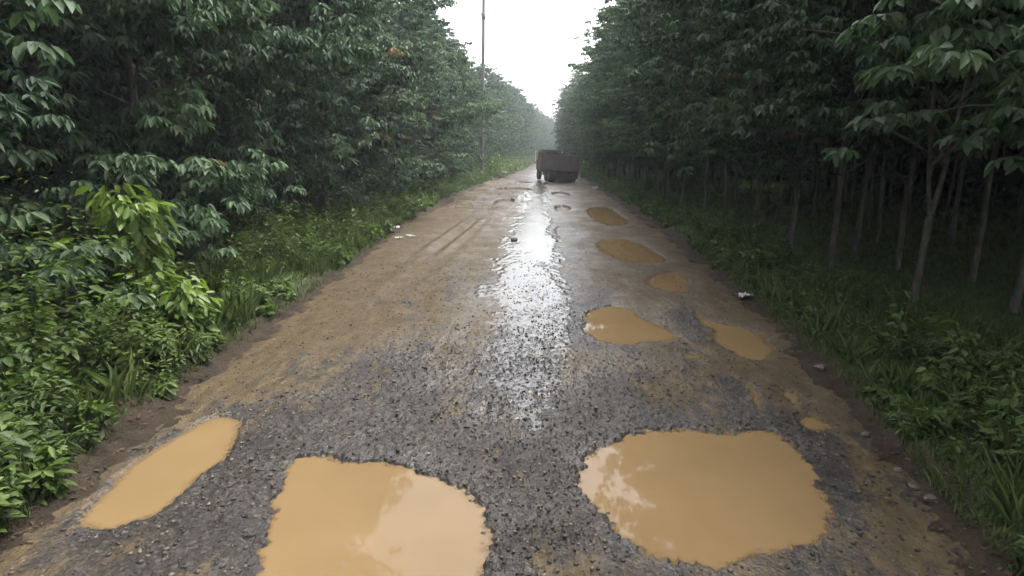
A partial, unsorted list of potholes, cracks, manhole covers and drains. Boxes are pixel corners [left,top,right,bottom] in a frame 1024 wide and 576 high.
pothole [594,238,670,264]
pothole [242,449,501,576]
pothole [639,270,694,293]
pothole [578,304,684,346]
pothole [568,423,845,576]
pothole [688,306,780,363]
pothole [586,206,631,226]
pothole [61,412,251,536]
pothole [788,410,843,436]
